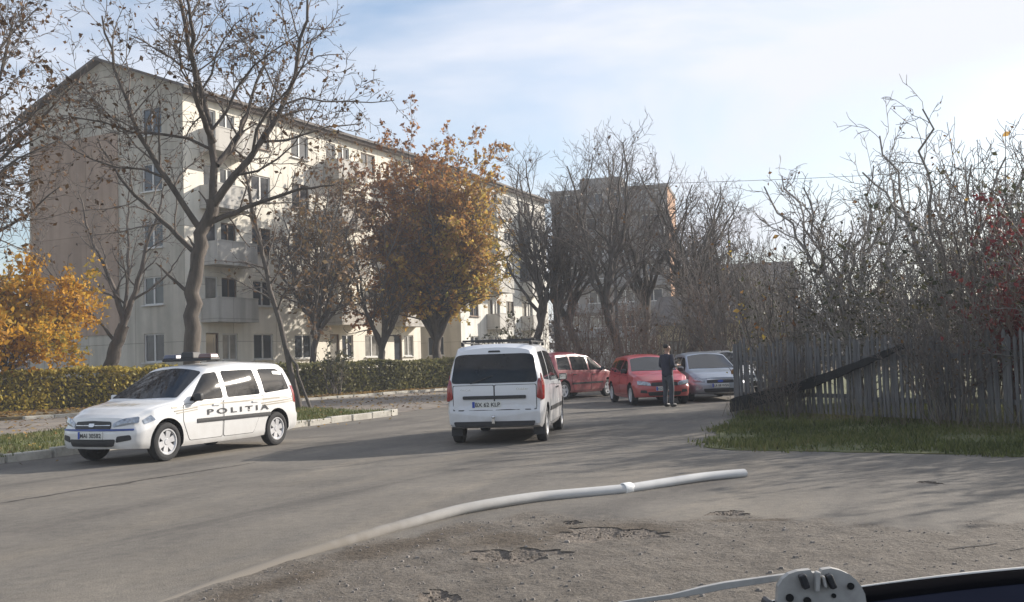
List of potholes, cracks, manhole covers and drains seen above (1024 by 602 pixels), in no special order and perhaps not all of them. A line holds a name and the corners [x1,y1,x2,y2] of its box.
pothole [547,527,670,543]
pothole [414,589,462,602]
pothole [461,547,574,564]
